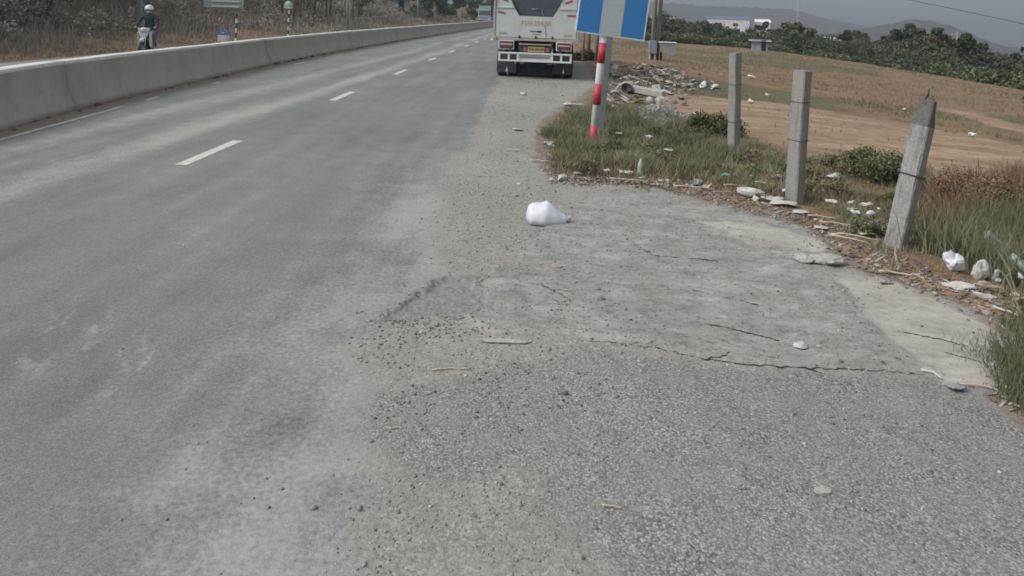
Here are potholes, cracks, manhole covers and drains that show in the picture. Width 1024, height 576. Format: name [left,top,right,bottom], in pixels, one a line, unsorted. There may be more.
crack [898,331,993,367]
crack [590,321,922,375]
